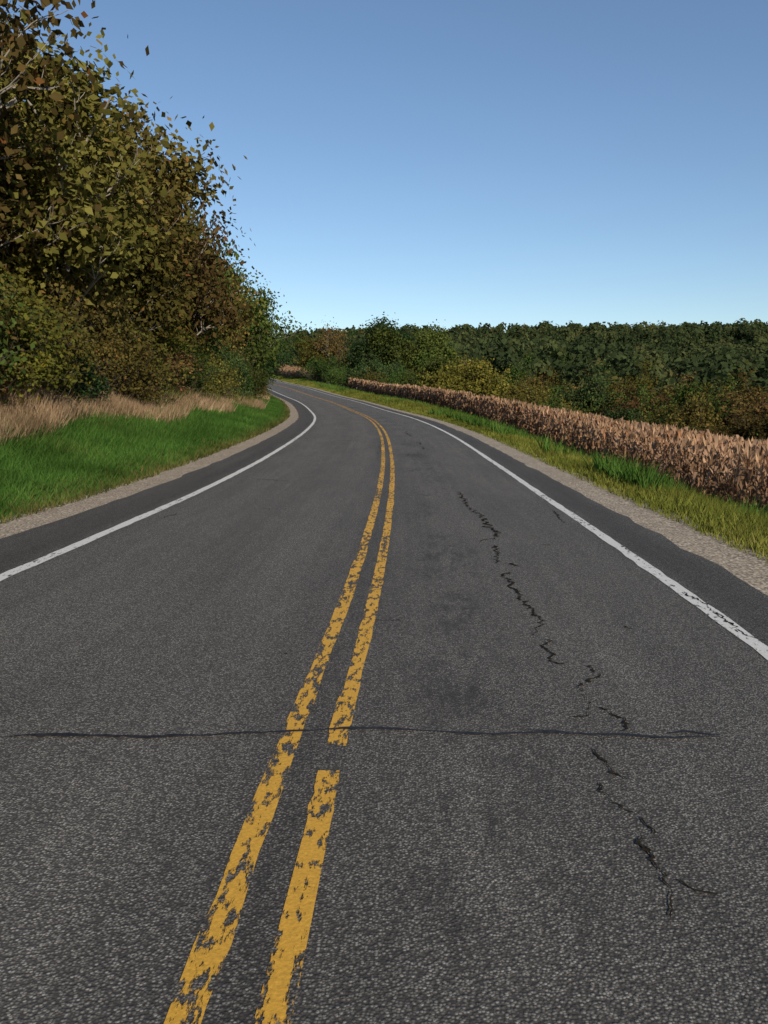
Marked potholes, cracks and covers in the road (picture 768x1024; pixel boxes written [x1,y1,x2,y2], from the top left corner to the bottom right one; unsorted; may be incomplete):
crack [593,736,719,918]
crack [574,665,629,731]
crack [460,492,563,664]
